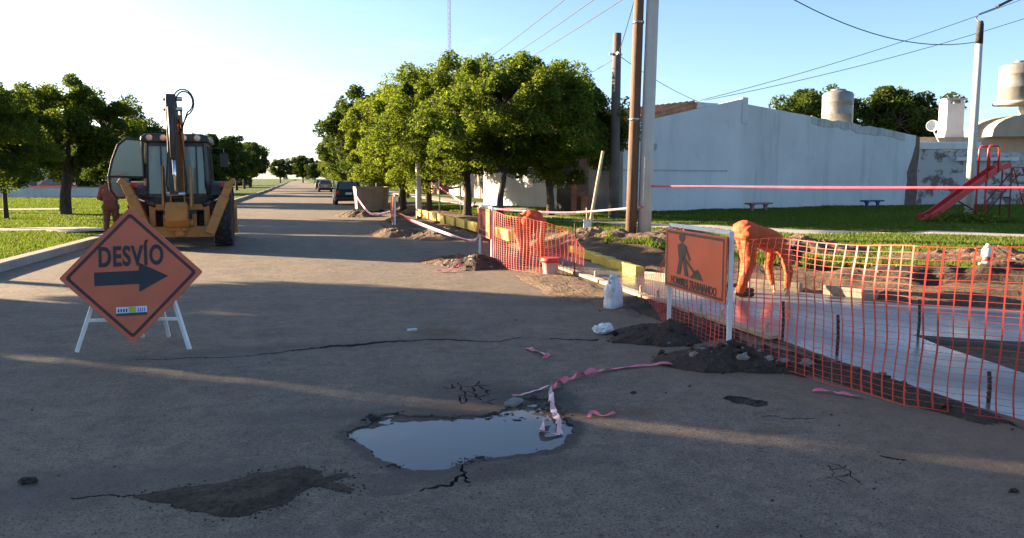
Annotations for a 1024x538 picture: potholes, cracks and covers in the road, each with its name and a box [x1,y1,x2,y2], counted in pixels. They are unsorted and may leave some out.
crack [825,463,860,484]
crack [443,381,496,405]
crack [419,463,470,492]
crack [135,337,520,360]
pothole [336,395,575,471]
